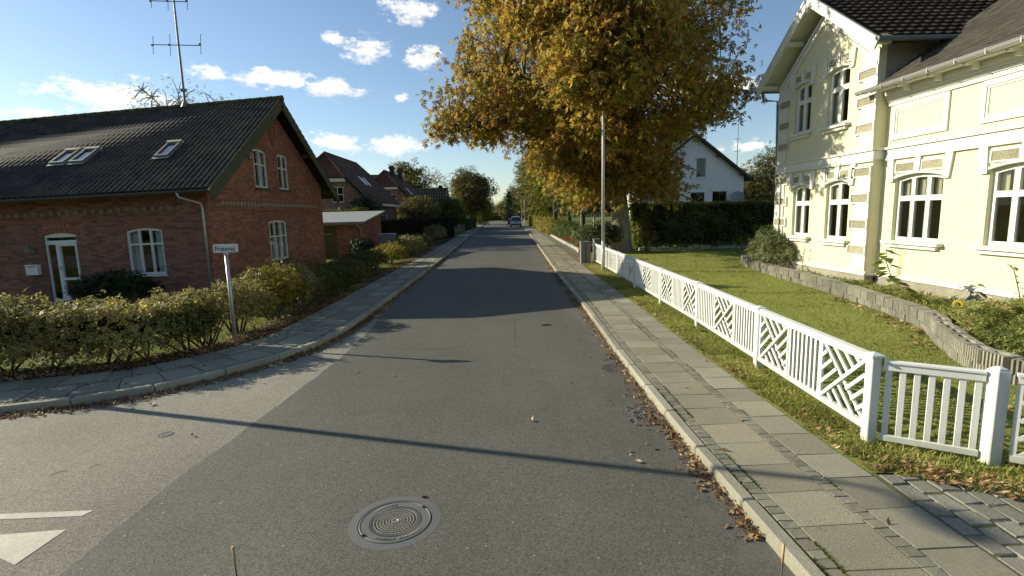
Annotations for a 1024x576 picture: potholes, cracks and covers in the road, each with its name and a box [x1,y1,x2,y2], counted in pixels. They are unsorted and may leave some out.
drain grate [630,410,661,423]
manhole cover [348,496,441,550]
